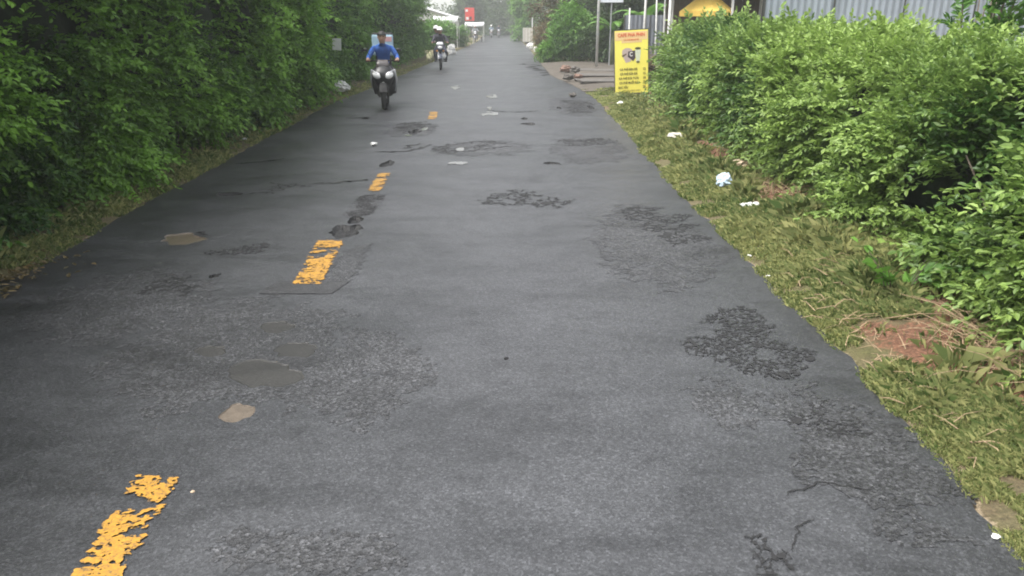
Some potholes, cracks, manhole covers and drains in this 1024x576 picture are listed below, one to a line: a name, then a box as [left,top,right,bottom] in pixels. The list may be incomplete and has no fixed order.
pothole [374,159,400,168]
crack [787,481,870,495]
crack [744,519,814,575]
crack [250,179,384,216]
pothole [323,223,368,241]
